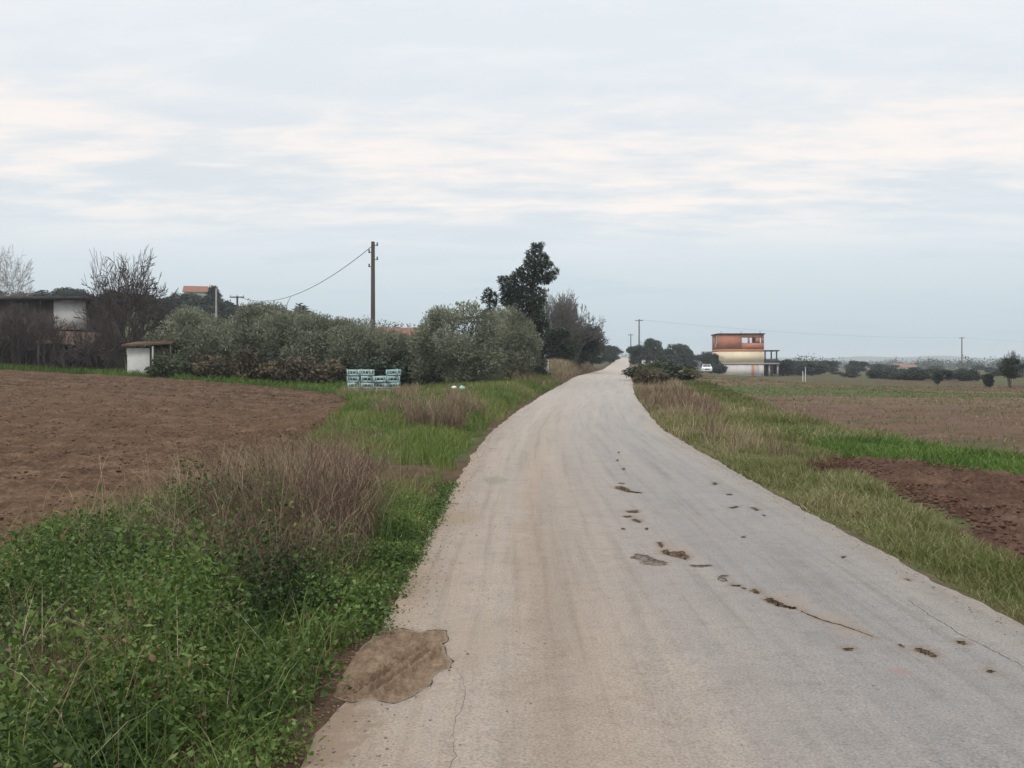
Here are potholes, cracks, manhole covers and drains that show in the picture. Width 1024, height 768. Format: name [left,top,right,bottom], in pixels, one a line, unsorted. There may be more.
pothole [765,598,797,609]
pothole [631,554,667,566]
pothole [662,550,690,560]
crack [449,667,466,768]
